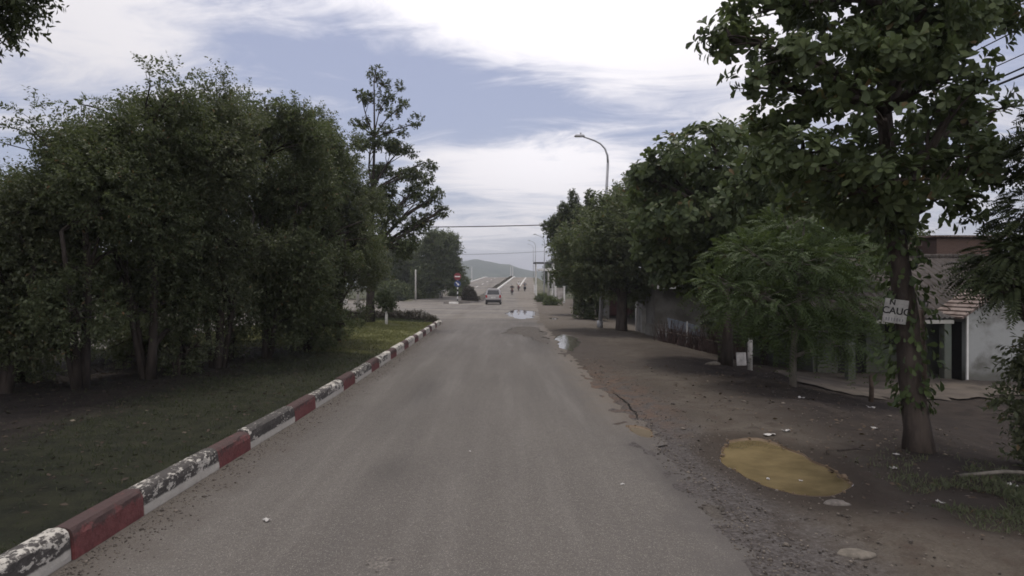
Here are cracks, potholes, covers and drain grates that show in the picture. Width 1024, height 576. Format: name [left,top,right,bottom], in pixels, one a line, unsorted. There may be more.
pothole [625,425,654,438]
crack [613,393,638,420]
pothole [719,437,853,496]
pothole [504,309,536,319]
pothole [554,334,582,352]
